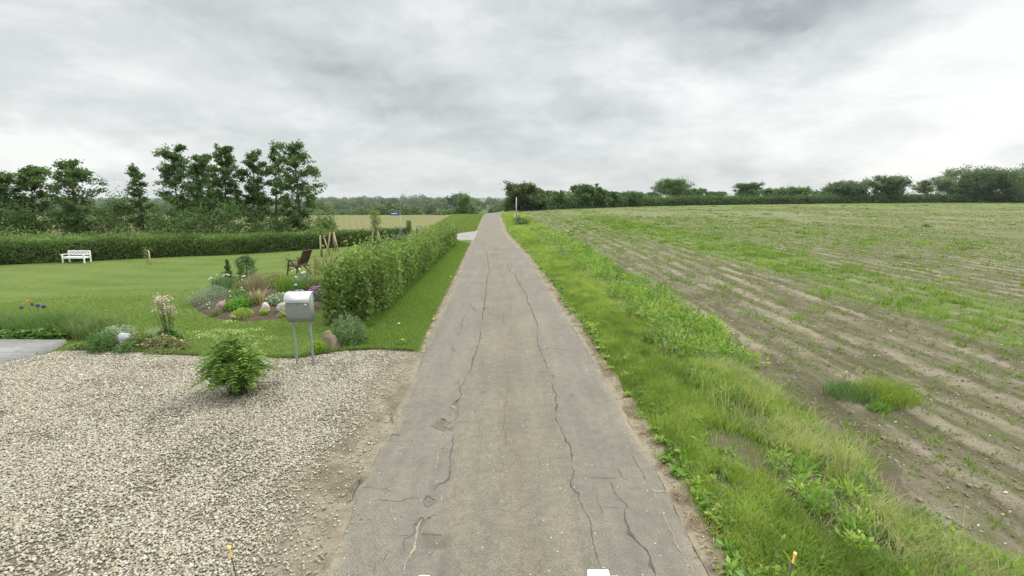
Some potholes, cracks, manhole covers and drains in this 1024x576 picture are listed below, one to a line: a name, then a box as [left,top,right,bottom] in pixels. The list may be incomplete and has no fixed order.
crack [545,371,698,575]
crack [347,438,451,575]
pothole [431,418,455,431]
